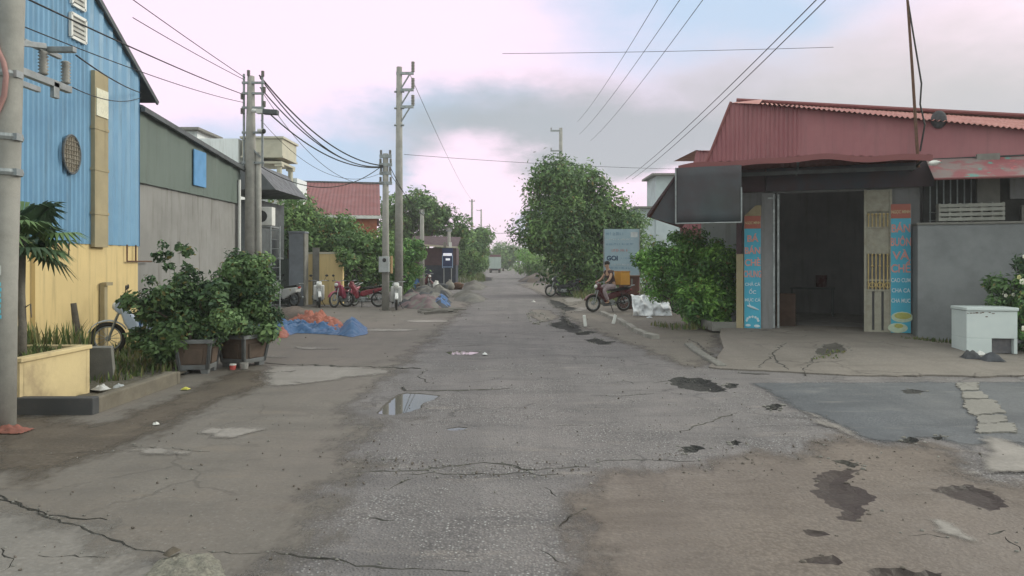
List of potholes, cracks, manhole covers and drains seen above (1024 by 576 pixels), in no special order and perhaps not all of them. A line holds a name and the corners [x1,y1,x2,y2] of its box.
pothole [676,445,713,454]
pothole [810,467,877,522]
pothole [815,343,850,356]
pothole [799,554,843,565]
pothole [586,337,616,345]
crack [738,343,816,375]
crack [359,459,578,496]
crack [1,546,16,569]
crack [203,547,472,573]
crack [679,413,735,433]
pothole [546,313,585,334]
pothole [665,376,736,393]
